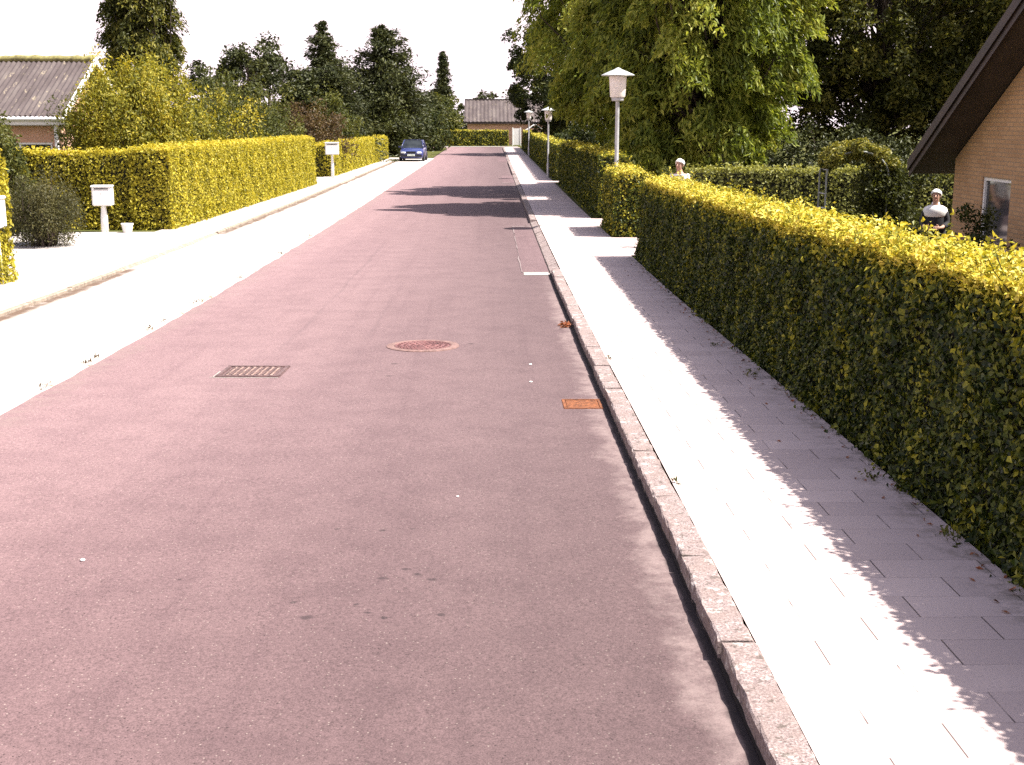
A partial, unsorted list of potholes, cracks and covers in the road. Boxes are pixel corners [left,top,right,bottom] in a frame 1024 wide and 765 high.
manhole cover [386,340,459,352]
drain grate [561,399,604,409]
